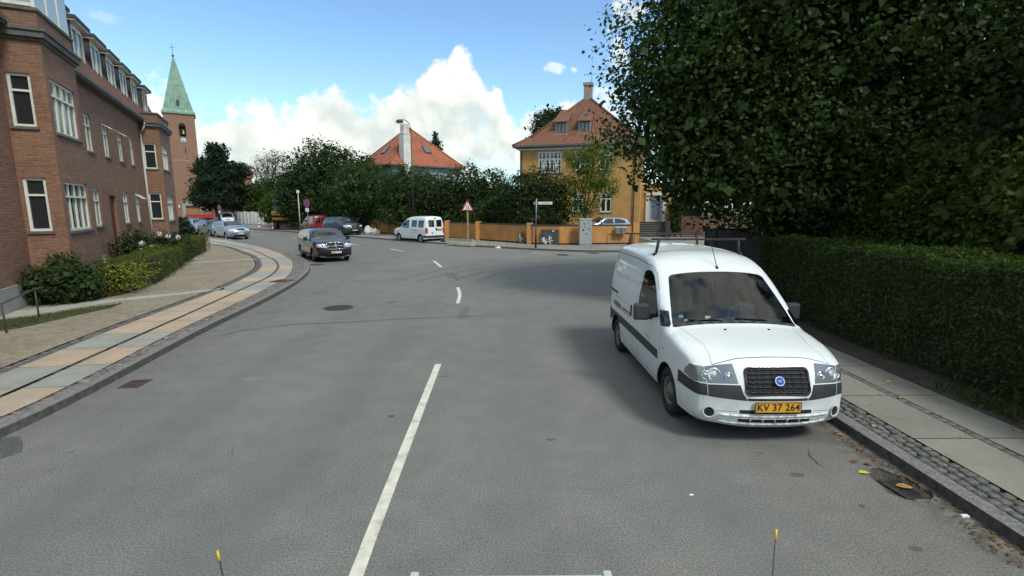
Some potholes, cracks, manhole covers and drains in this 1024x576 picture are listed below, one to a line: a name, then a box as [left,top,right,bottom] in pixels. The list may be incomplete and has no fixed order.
drain grate [876,478,929,500]
